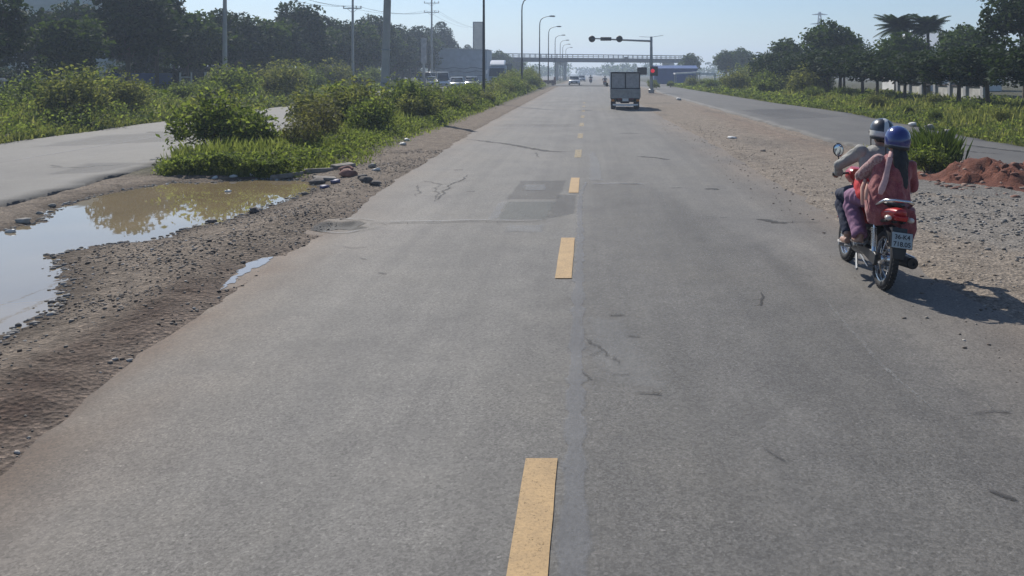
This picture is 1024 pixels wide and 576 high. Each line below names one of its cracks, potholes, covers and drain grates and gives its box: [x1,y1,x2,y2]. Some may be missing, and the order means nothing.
pothole [311,221,365,232]
crack [468,139,575,152]
